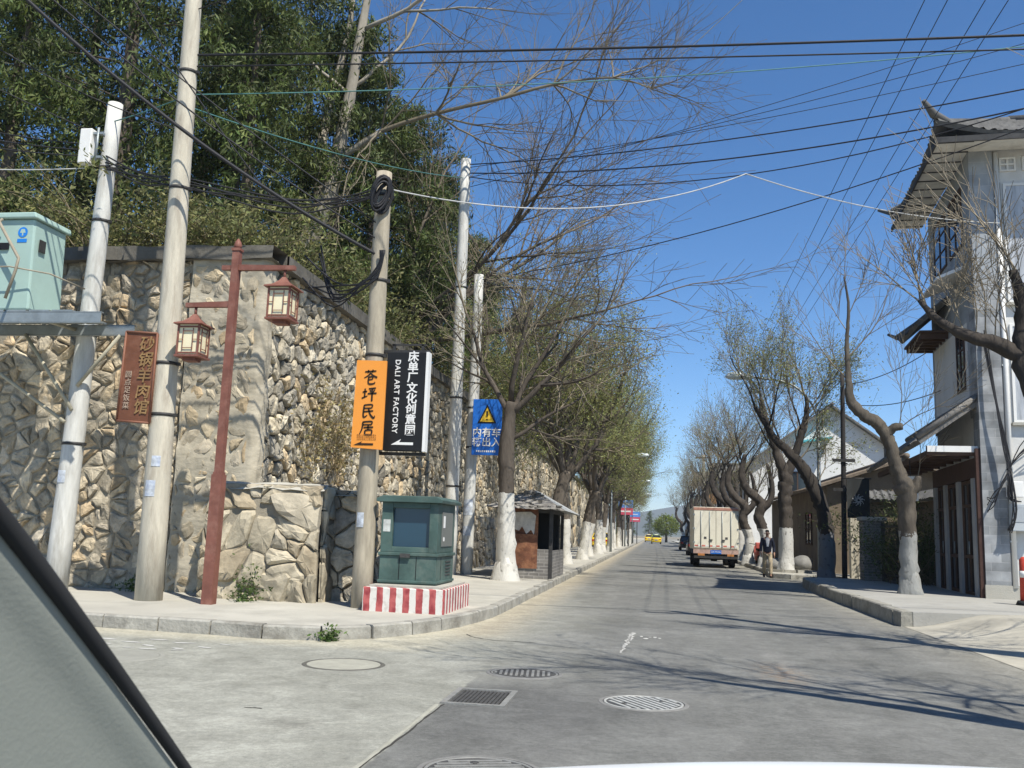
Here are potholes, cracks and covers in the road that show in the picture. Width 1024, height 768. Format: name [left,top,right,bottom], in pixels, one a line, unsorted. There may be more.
drain grate [439,687,518,708]
manhole cover [486,667,563,680]
manhole cover [598,695,689,712]
manhole cover [301,658,385,671]
manhole cover [417,755,538,768]
